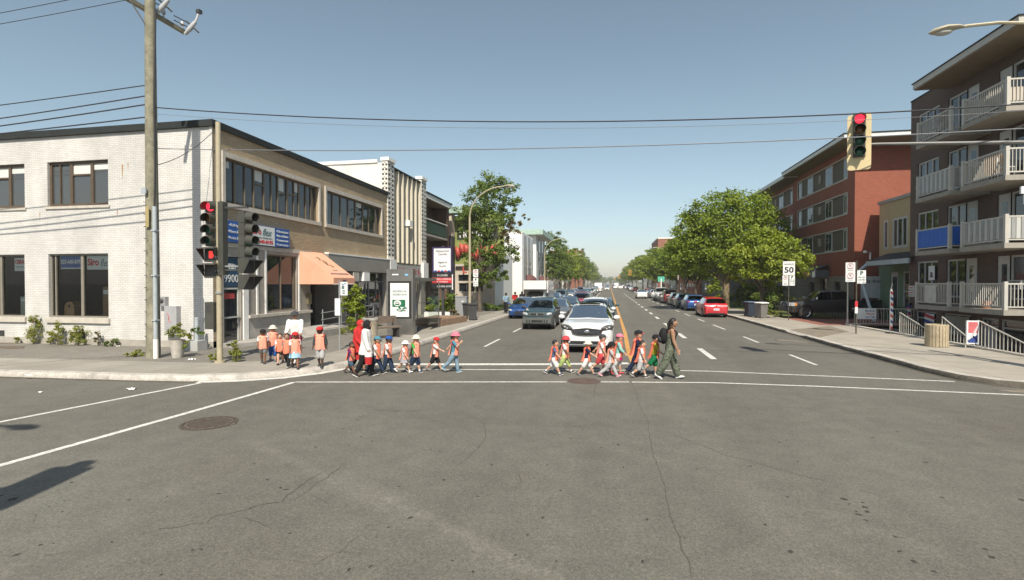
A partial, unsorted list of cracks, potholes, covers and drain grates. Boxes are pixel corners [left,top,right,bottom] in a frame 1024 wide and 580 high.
manhole cover [179,416,239,431]
crack [141,465,342,534]
